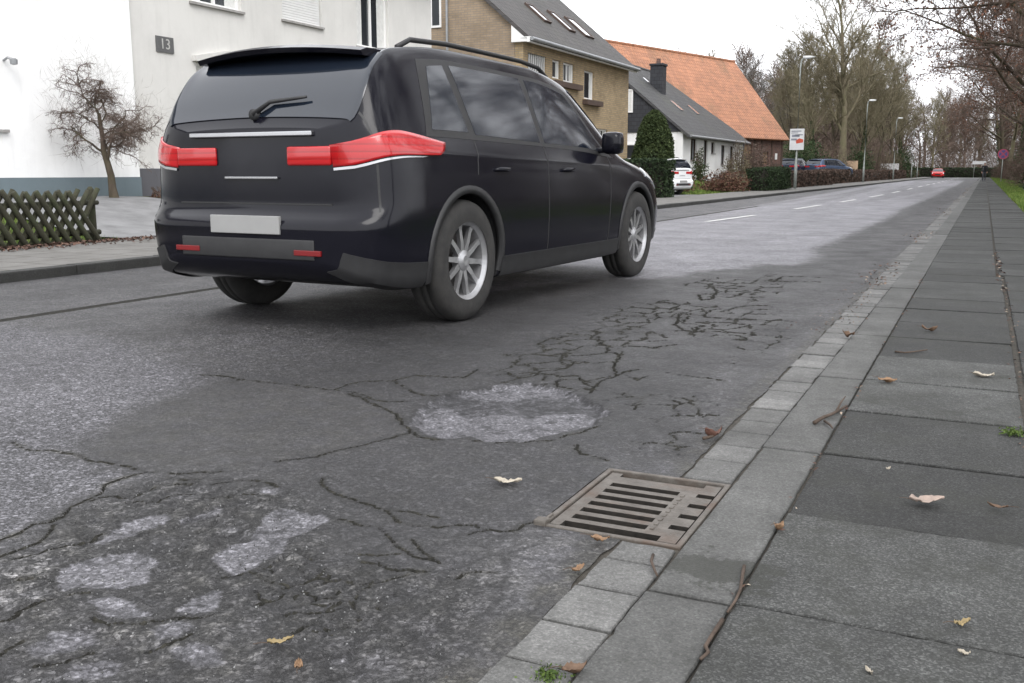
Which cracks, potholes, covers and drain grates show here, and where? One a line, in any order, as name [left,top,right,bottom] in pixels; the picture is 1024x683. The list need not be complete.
crack [221,478,534,642]
crack [202,369,609,462]
crack [0,577,210,668]
crack [0,441,278,560]
crack [496,274,821,451]
drain grate [534,468,731,551]
